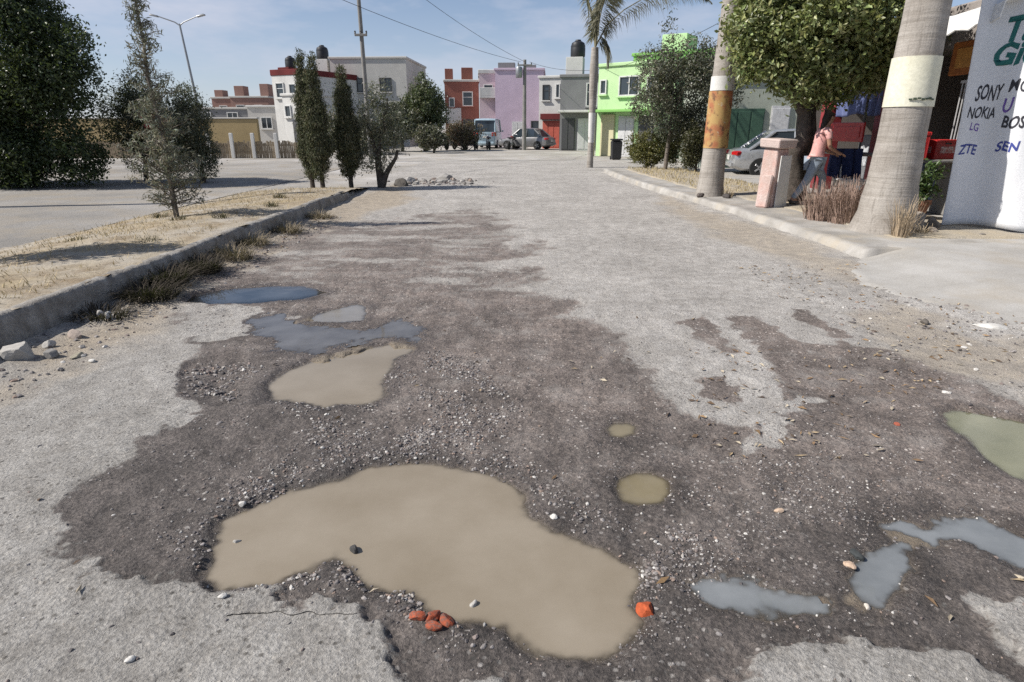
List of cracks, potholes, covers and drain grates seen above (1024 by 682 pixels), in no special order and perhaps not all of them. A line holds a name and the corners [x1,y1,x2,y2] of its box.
pothole [177,283,331,305]
pothole [817,534,928,626]
pothole [260,339,424,411]
pothole [241,310,436,358]
pothole [860,506,1024,575]
pothole [669,563,845,631]
pothole [597,415,647,443]
pothole [293,301,375,324]
pothole [929,402,1024,482]
pothole [187,451,661,670]
pothole [603,463,686,511]
